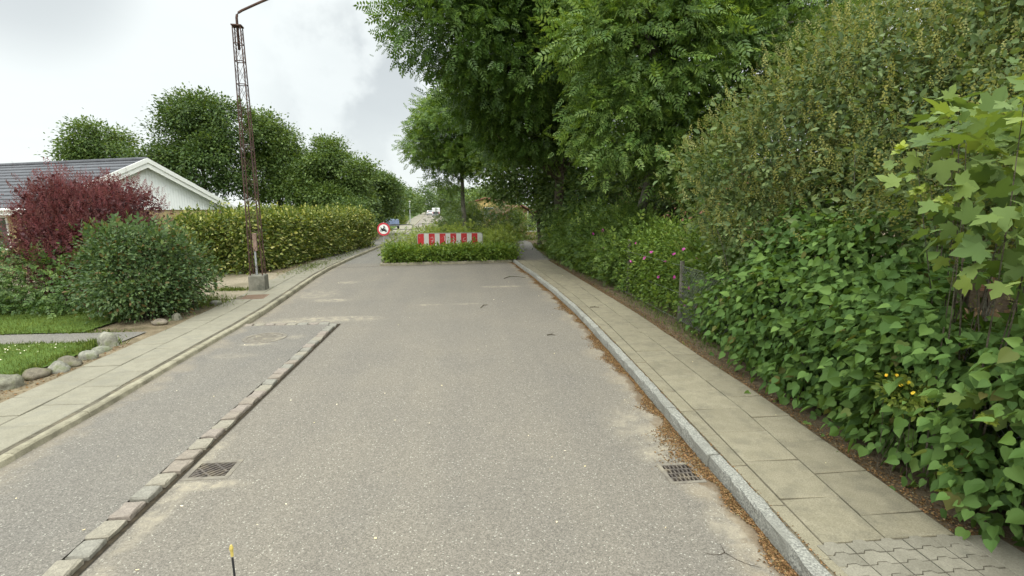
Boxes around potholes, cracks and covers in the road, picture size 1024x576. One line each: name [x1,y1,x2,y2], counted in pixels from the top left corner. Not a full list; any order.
drain grate [180,459,244,481]
drain grate [656,462,707,484]
manhole cover [242,332,287,343]
